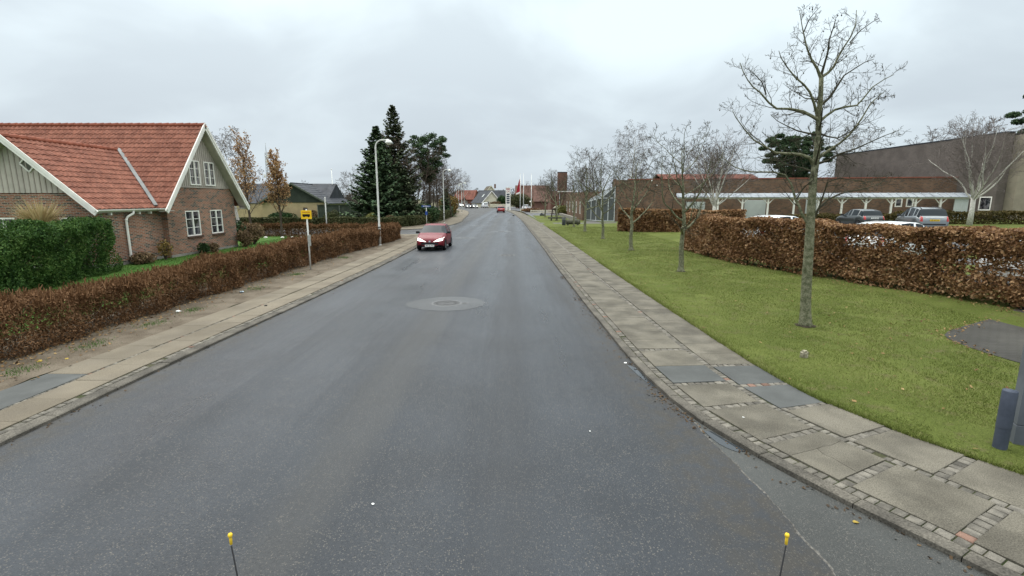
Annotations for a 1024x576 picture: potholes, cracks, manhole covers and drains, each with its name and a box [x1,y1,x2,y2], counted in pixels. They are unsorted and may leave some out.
manhole cover [406,297,485,311]
